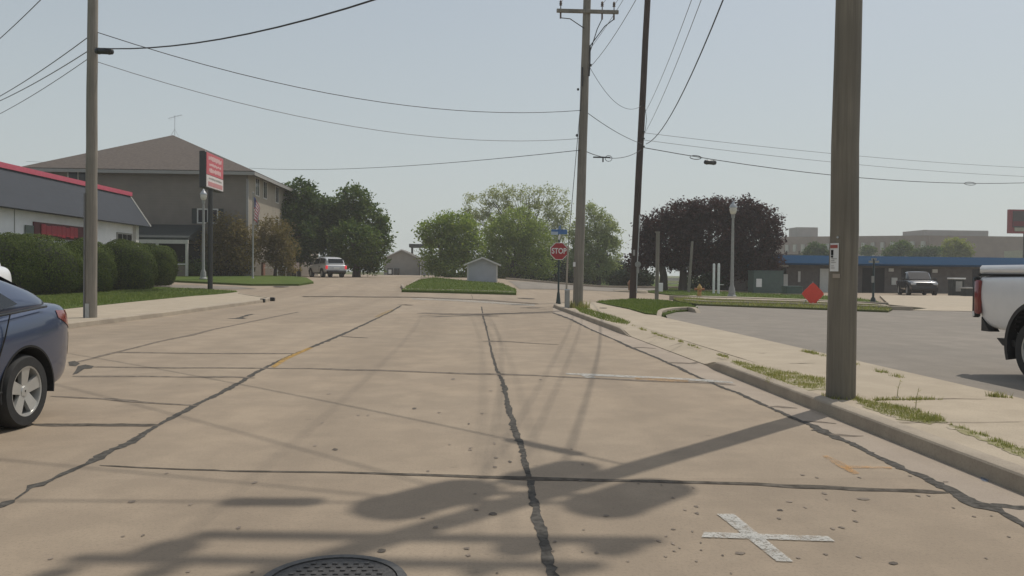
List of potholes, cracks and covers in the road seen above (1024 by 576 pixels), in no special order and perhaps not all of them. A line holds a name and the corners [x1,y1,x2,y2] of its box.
manhole cover [263,554,407,576]
